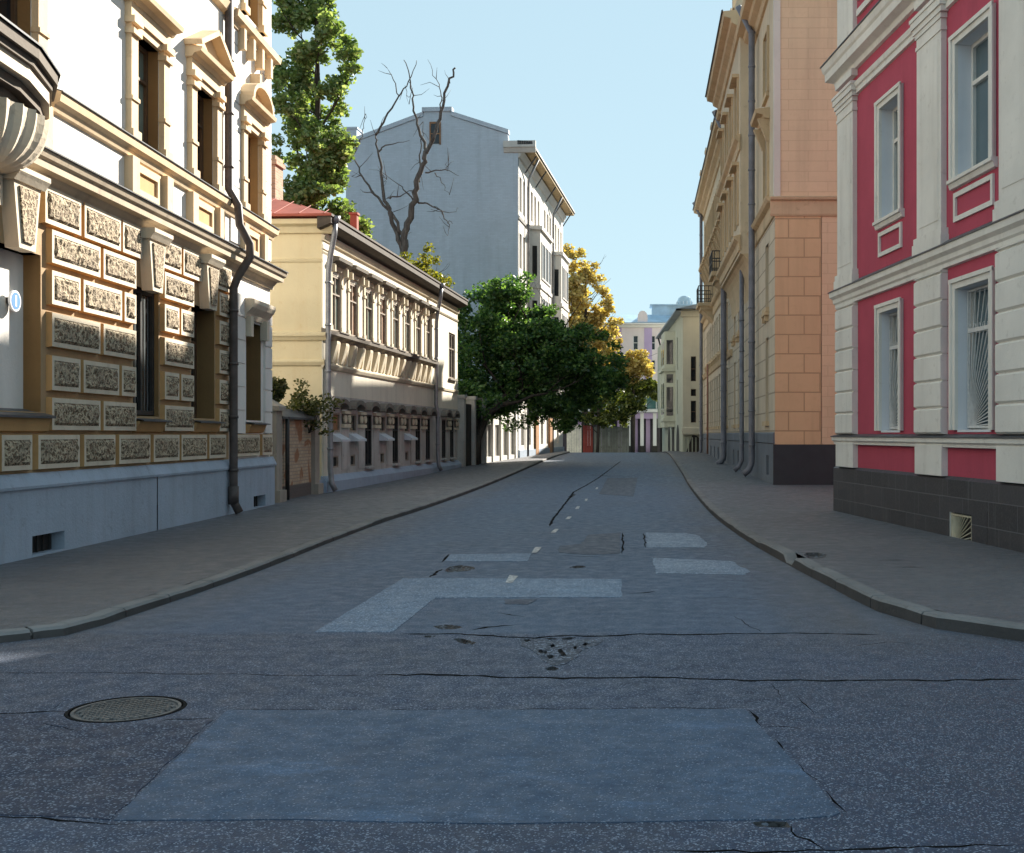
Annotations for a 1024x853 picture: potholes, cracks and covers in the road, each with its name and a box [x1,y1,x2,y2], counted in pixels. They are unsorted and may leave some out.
crack [384,673,1020,853]
manhole cover [65,696,187,723]
crack [413,613,921,646]
